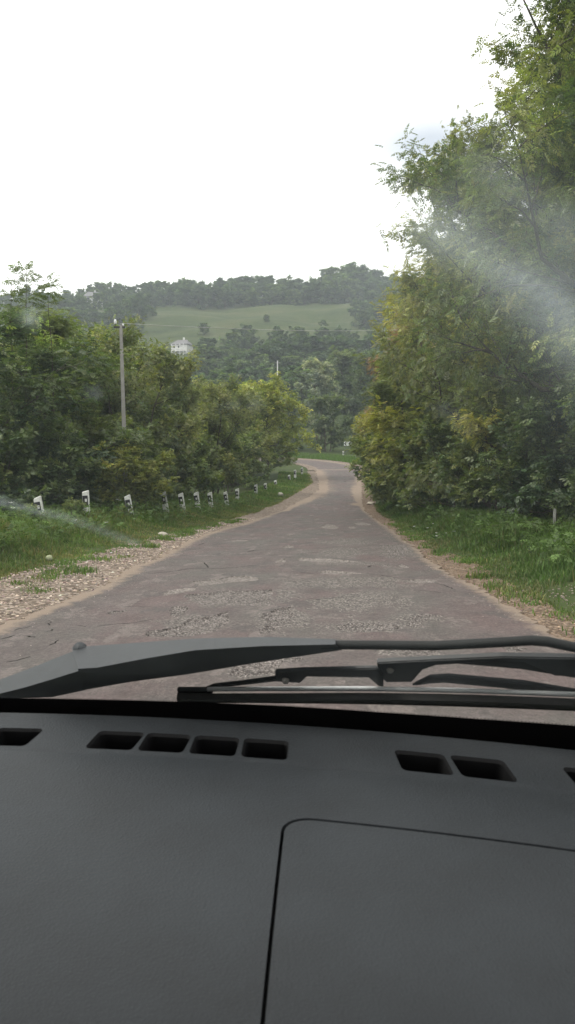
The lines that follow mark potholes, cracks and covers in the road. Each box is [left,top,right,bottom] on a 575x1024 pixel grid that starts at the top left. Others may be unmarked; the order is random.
pothole [145,611,230,637]
pothole [259,607,293,634]
pothole [170,606,189,618]
pothole [336,623,400,632]
